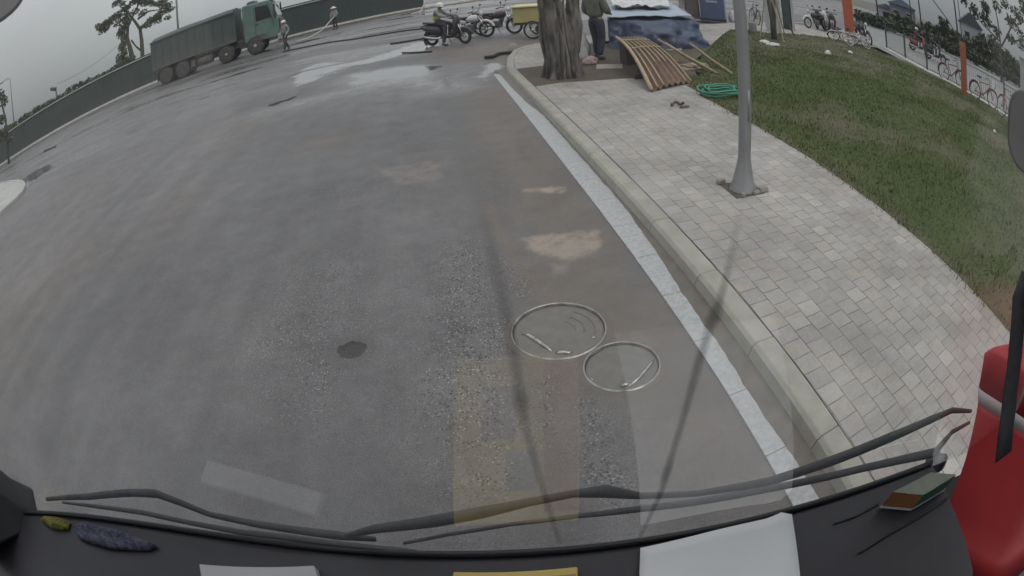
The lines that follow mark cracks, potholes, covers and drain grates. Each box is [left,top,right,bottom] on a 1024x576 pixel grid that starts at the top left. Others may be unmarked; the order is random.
manhole cover [505,300,612,364]
manhole cover [577,338,667,396]
